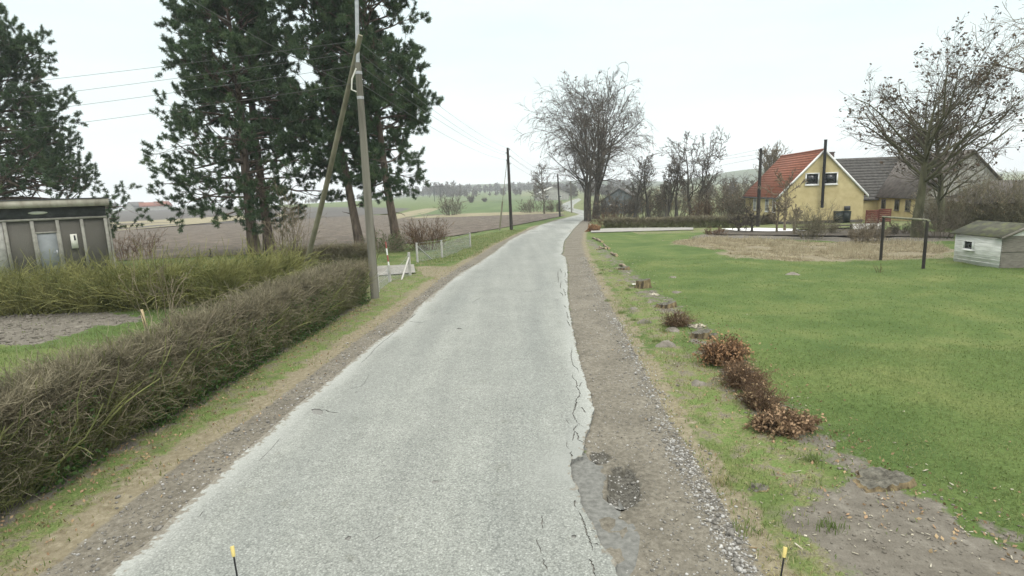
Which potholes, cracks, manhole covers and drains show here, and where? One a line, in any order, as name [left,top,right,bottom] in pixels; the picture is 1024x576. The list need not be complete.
crack [574,501,598,576]
crack [566,352,585,457]
